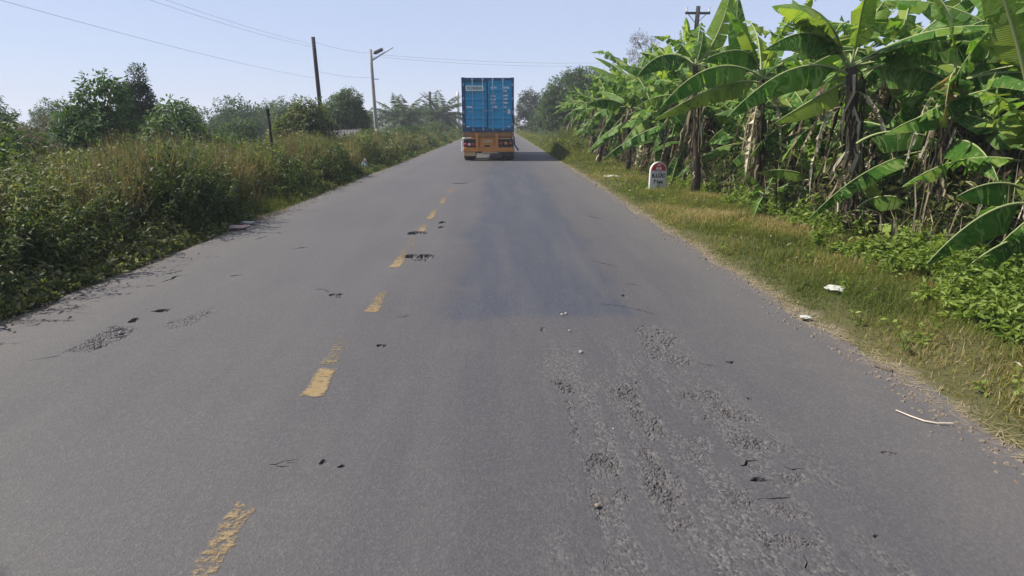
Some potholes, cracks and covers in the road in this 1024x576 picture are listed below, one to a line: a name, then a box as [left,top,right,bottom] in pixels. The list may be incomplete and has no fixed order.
pothole [402,254,435,262]
